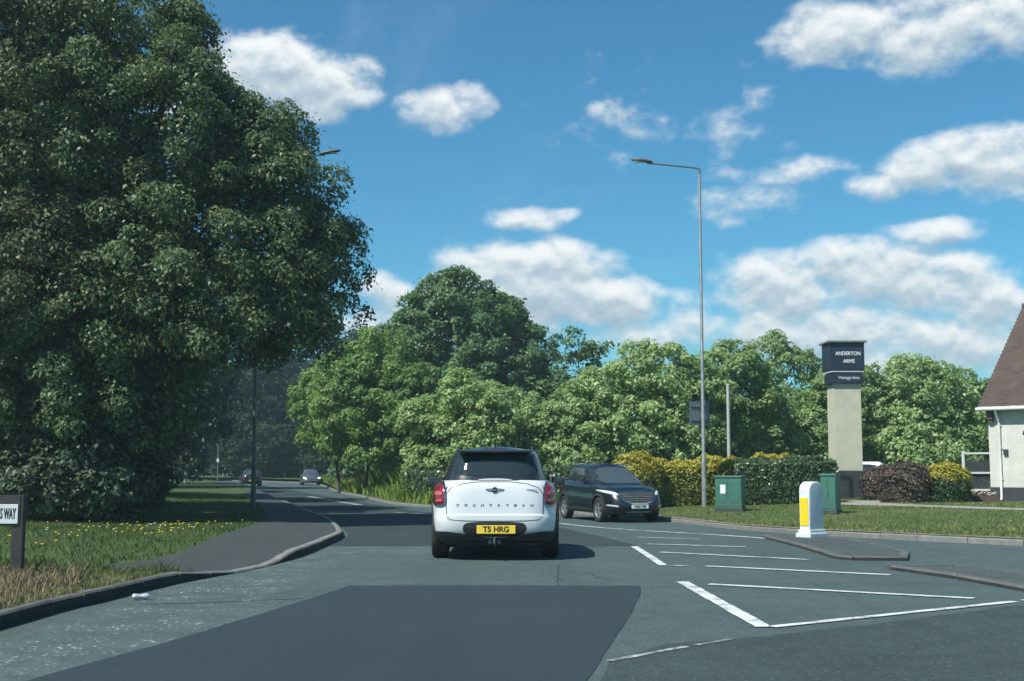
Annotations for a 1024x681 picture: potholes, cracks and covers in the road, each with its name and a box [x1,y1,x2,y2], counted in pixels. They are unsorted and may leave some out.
crack [556,565,610,585]
